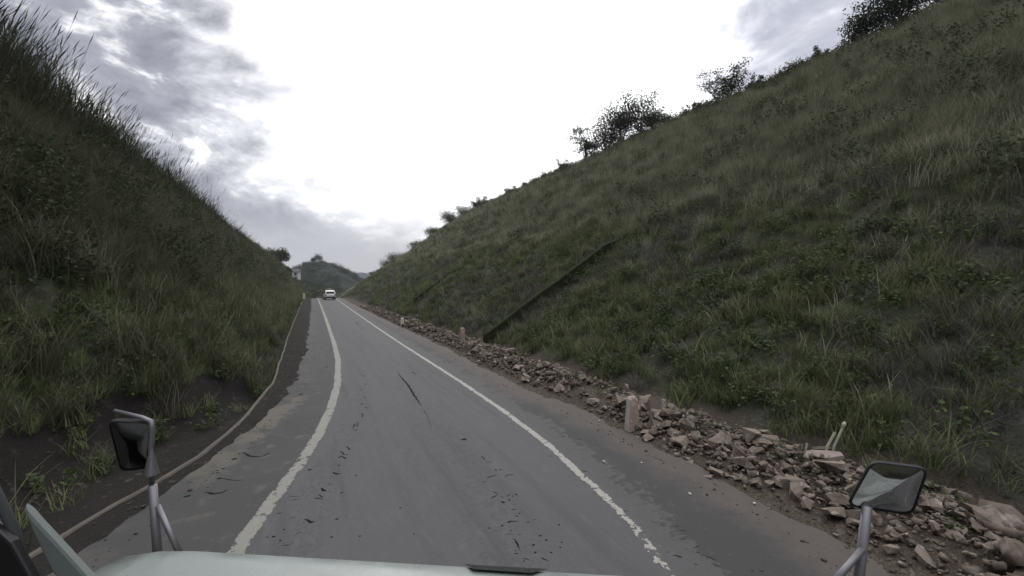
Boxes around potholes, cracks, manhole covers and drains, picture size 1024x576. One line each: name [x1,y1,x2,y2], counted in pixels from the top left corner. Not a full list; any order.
crack [480,456,548,561]
crack [400,372,431,426]
crack [186,478,240,495]
crack [267,446,350,546]
